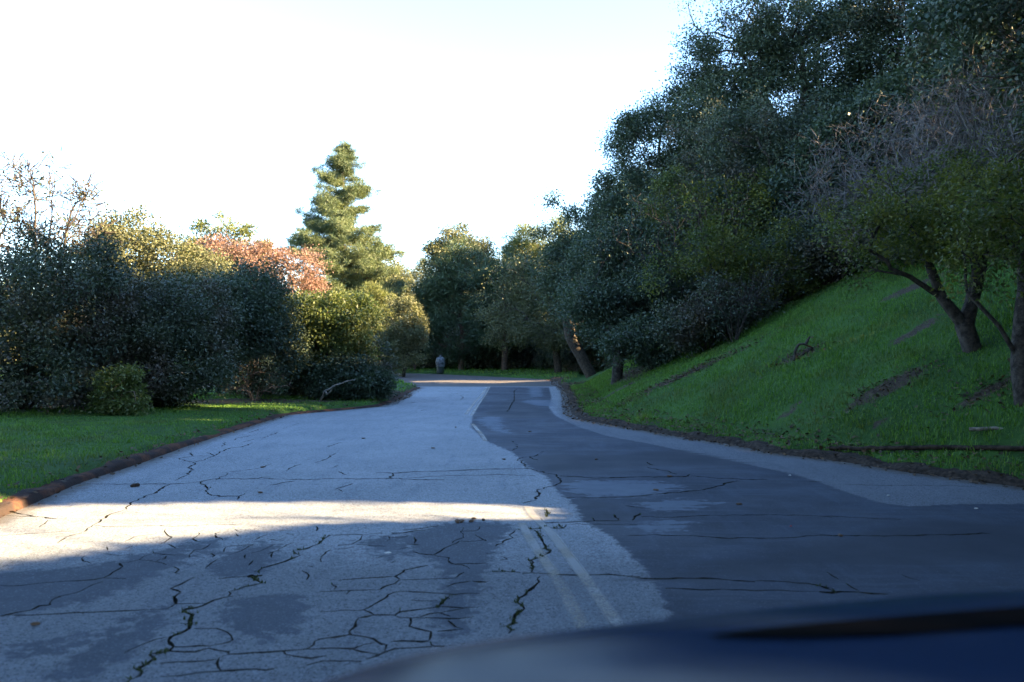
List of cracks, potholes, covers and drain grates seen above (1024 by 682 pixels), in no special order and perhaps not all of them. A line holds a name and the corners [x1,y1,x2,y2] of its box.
crack [0,429,991,682]
